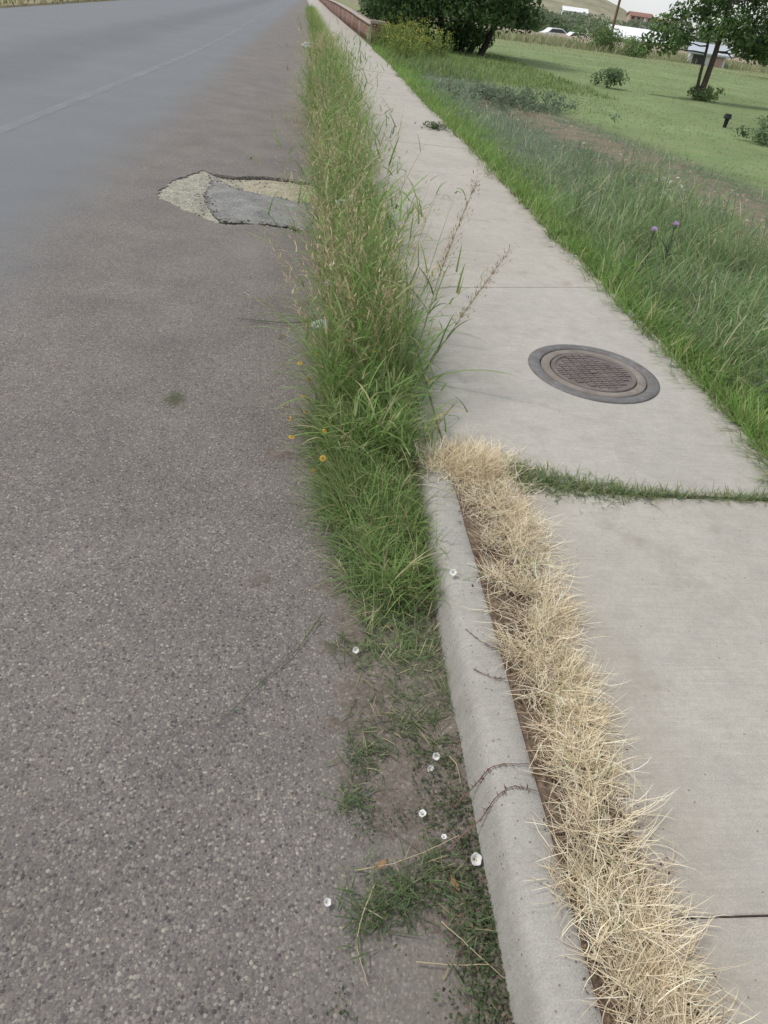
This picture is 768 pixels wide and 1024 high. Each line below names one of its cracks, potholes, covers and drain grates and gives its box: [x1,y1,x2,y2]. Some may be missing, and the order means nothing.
manhole cover [528,344,660,404]
